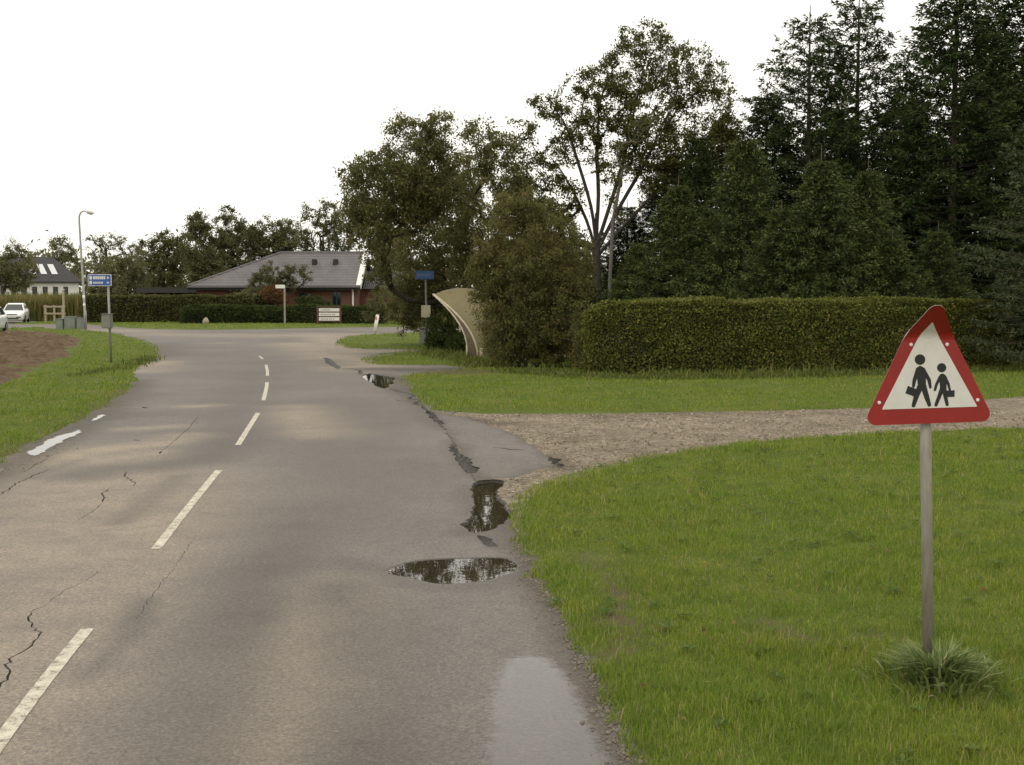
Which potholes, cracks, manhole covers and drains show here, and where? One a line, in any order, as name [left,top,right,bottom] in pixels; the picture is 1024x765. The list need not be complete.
crack [0,569,102,687]
crack [1,459,47,494]
pothole [460,480,512,533]
pothole [362,373,395,388]
pothole [448,444,479,474]
crack [77,471,137,521]
pothole [384,557,519,584]
